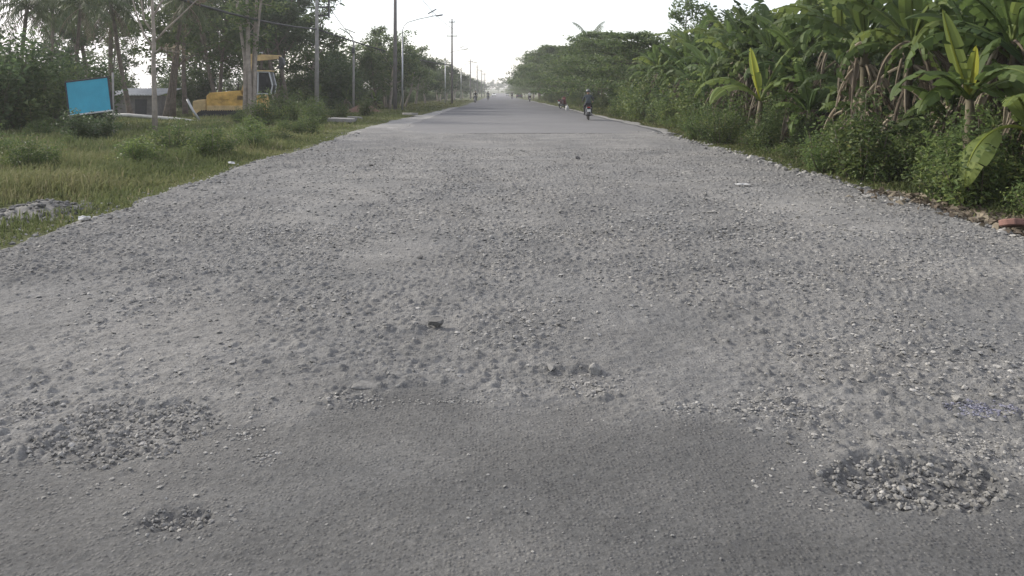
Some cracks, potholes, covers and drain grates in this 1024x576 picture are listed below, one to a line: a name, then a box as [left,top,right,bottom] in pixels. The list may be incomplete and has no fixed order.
pothole [802,449,1011,517]
pothole [2,393,242,475]
pothole [129,501,221,534]
